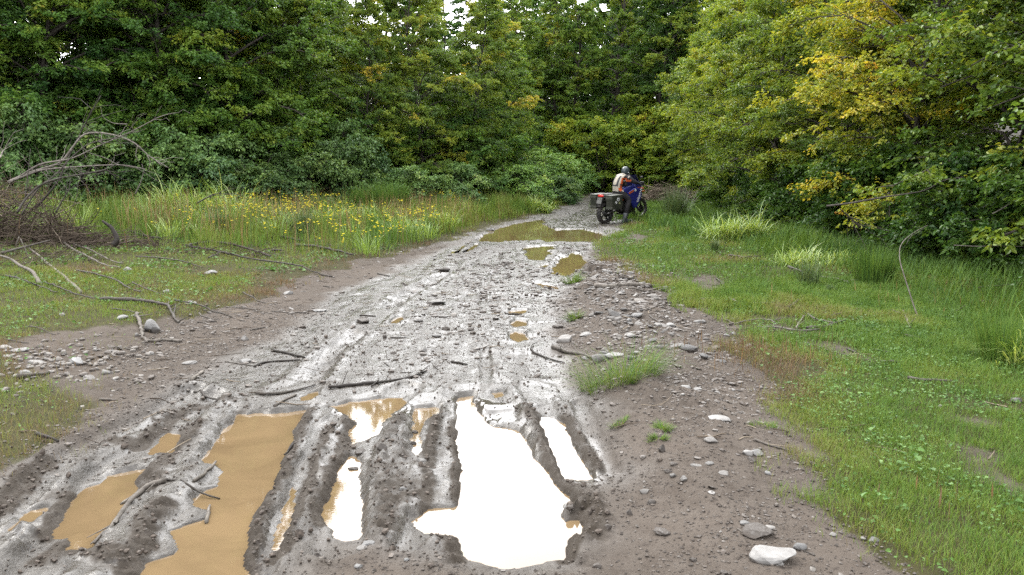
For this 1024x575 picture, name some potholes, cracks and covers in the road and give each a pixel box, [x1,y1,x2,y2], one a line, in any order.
pothole [312,450,371,544]
pothole [544,251,592,276]
pothole [403,390,591,573]
pothole [471,218,612,242]
pothole [43,462,150,553]
pothole [108,405,311,575]
